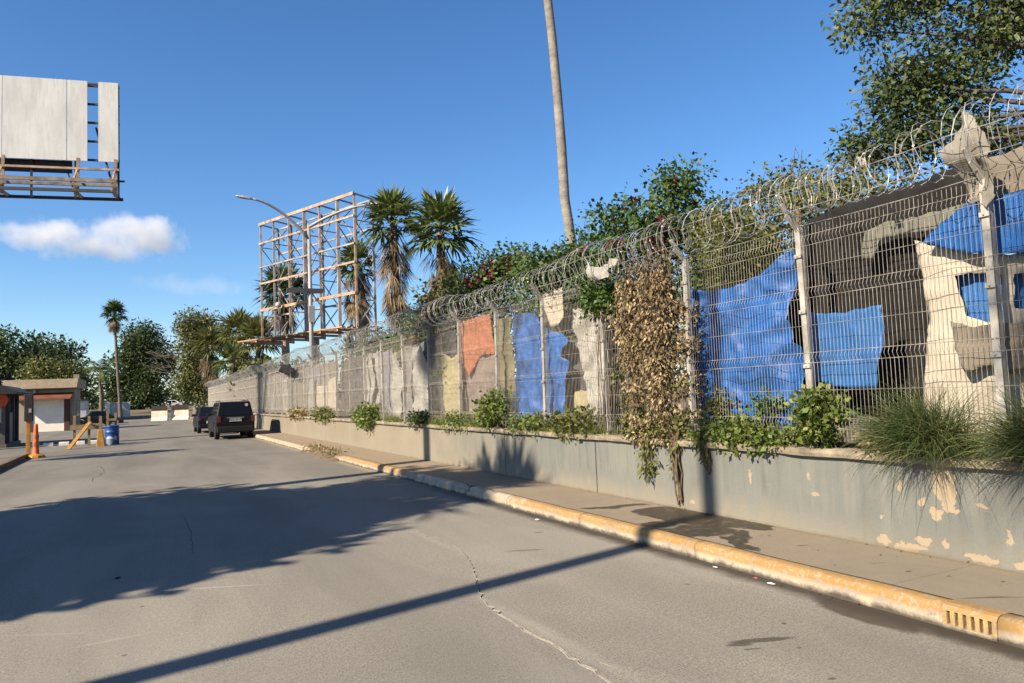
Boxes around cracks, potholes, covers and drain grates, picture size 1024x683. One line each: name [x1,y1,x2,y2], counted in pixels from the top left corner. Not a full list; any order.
crack [411,527,619,683]
drain grate [942,599,1010,642]
